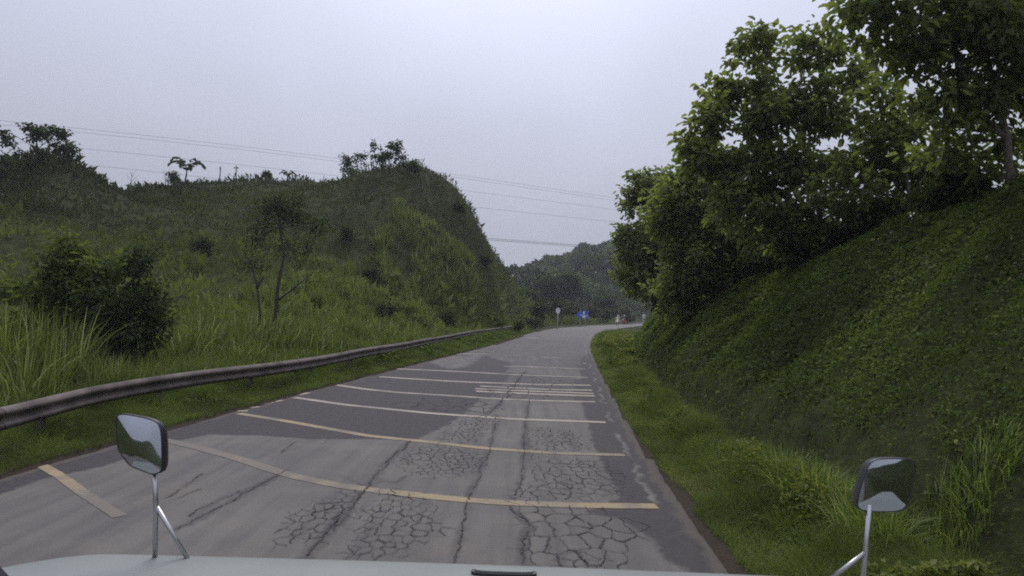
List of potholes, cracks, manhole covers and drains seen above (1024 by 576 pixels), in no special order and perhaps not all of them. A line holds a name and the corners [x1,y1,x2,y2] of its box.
crack [272,372,651,570]
crack [165,470,286,529]
